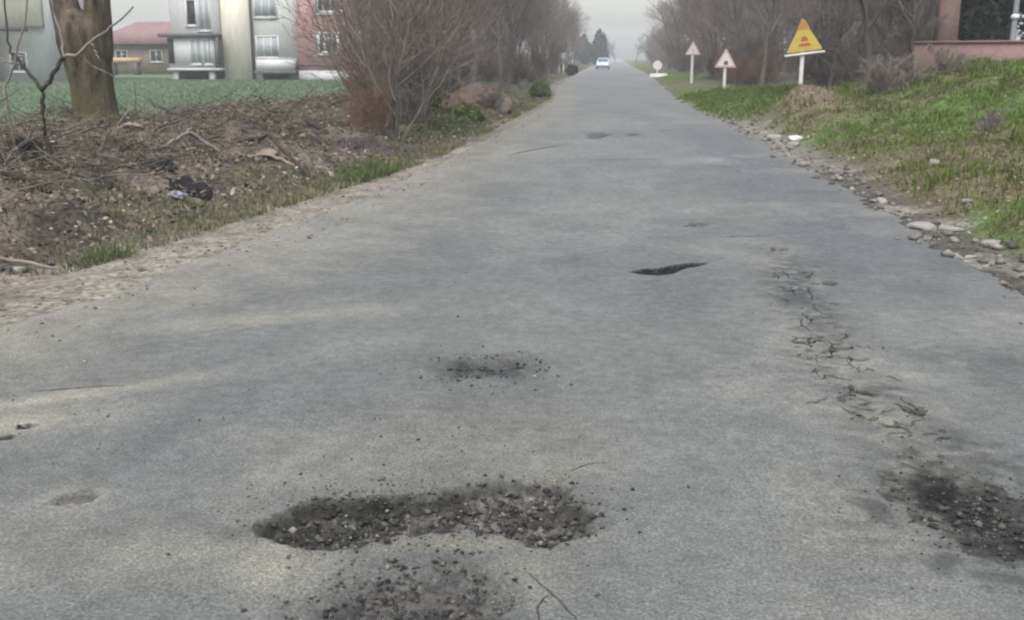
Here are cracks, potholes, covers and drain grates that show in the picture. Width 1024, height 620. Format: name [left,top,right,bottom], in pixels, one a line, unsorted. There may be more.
crack [511,144,569,155]
pothole [629,262,707,276]
pothole [250,475,605,554]
pothole [875,448,1024,567]
pothole [265,548,533,620]
pothole [40,487,104,508]
pothole [423,350,550,384]
crack [524,570,577,620]
